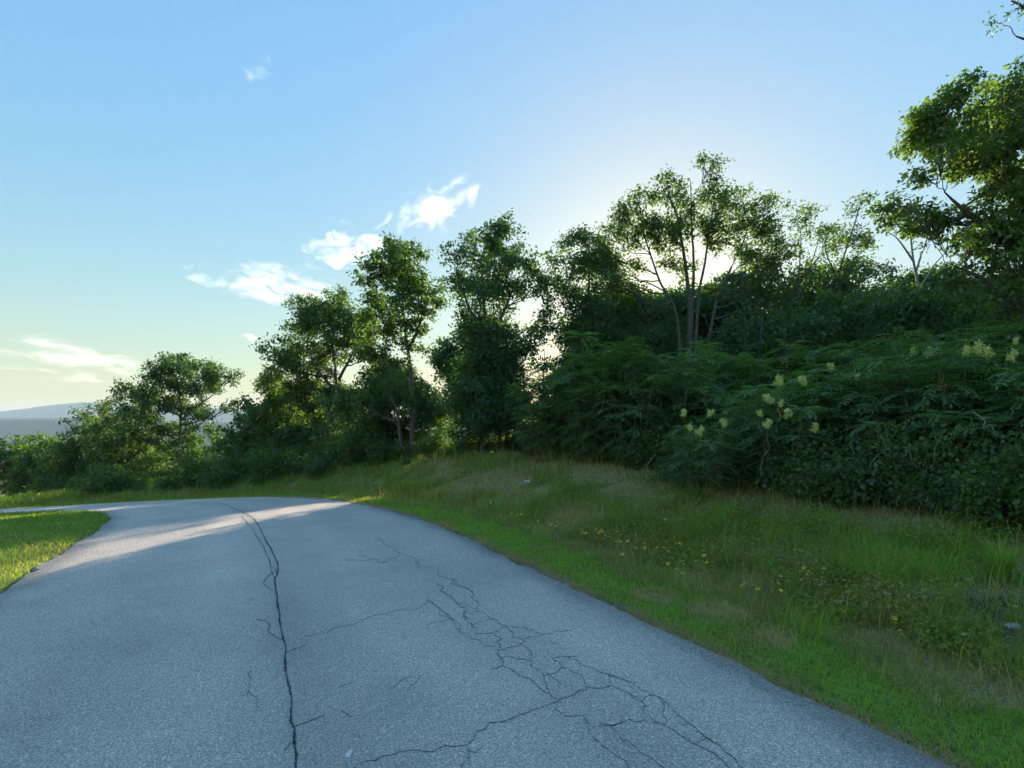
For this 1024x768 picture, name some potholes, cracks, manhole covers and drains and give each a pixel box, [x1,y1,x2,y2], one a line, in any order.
crack [309,575,743,768]
crack [210,501,324,768]
